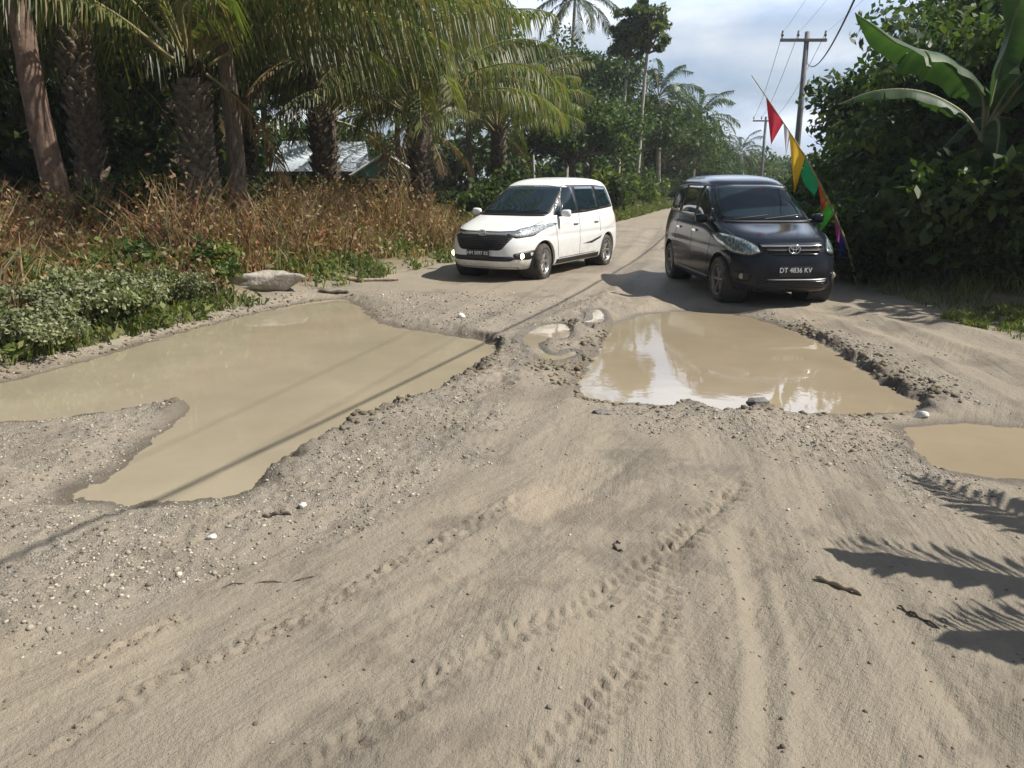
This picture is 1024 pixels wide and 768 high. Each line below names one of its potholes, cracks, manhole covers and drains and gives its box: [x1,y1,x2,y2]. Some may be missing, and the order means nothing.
pothole [0,298,505,509]
pothole [568,309,937,416]
pothole [517,322,581,360]
pothole [887,419,1024,485]
